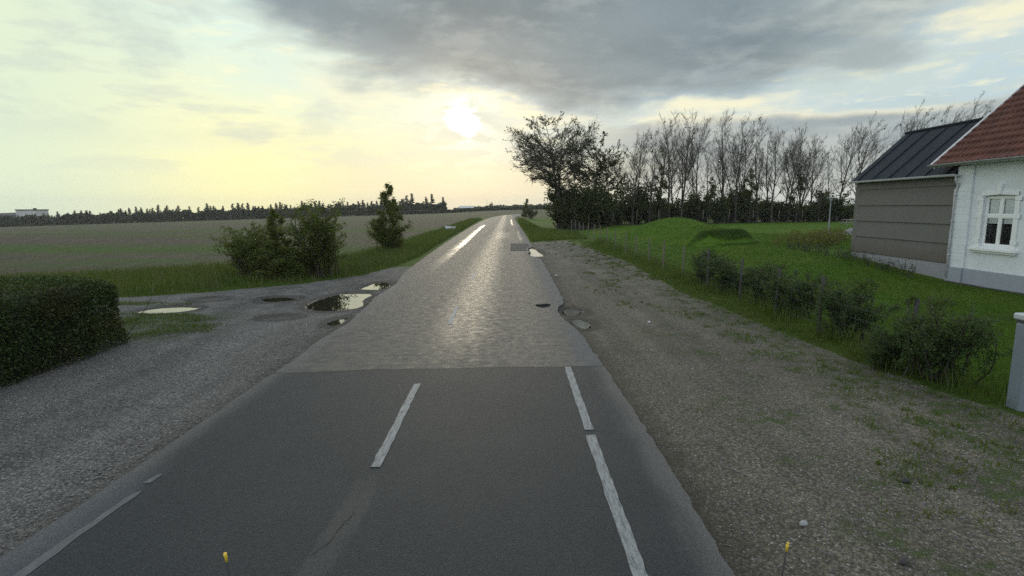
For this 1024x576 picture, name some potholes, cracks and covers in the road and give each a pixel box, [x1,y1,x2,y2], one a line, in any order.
pothole [360,282,391,290]
pothole [305,292,374,311]
pothole [561,307,583,316]
pothole [570,319,592,329]
crack [311,513,353,555]
